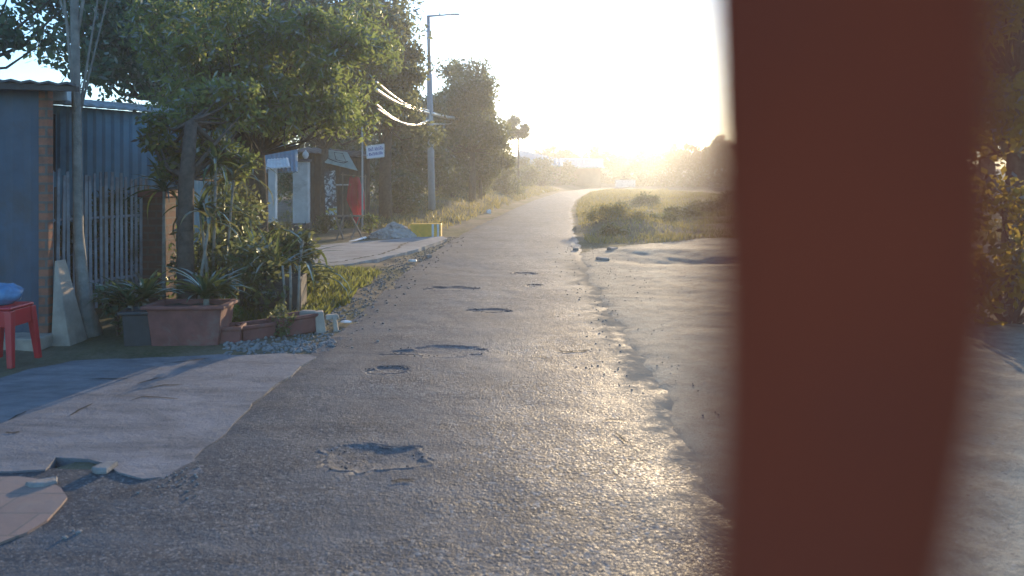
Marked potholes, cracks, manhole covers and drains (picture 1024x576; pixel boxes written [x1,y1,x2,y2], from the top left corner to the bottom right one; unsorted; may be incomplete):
pothole [316,443,435,475]
pothole [378,345,494,358]
pothole [365,366,411,375]
